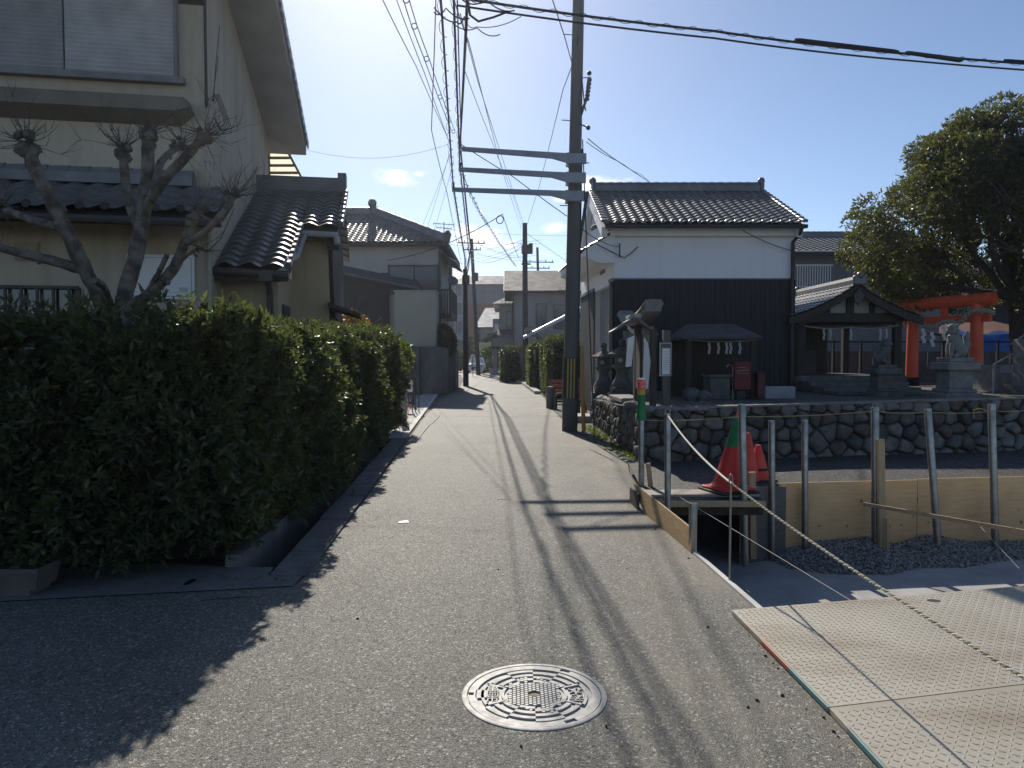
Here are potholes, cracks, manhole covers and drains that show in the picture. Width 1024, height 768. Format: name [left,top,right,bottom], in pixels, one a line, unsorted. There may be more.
manhole cover [462,664,607,731]
